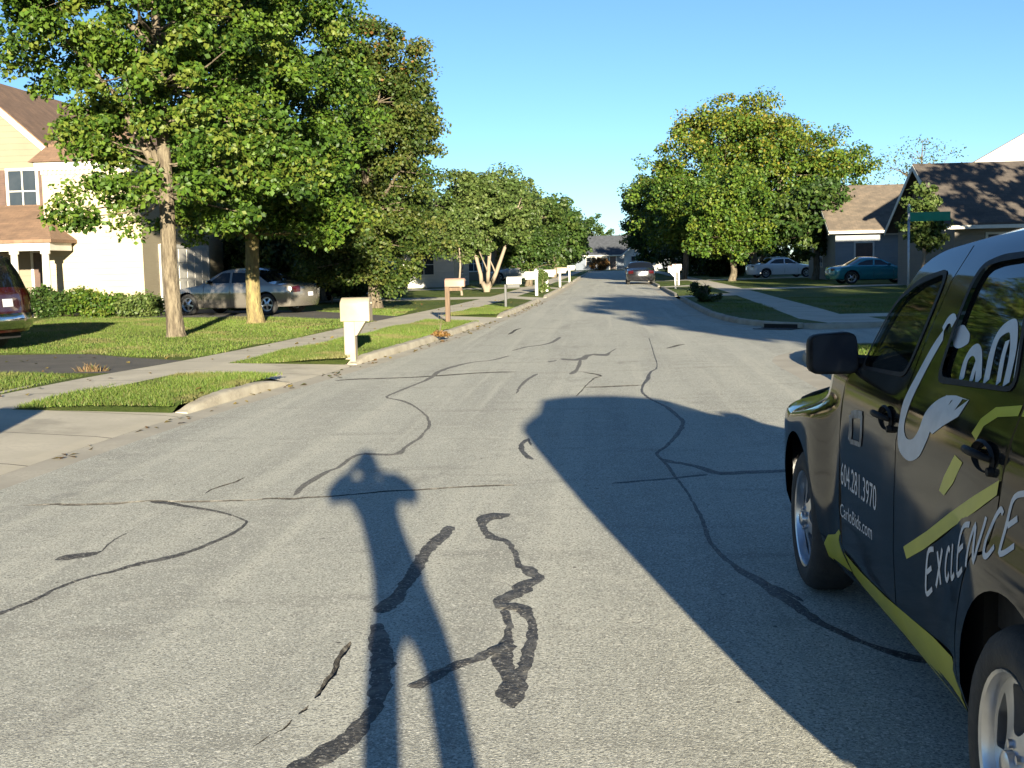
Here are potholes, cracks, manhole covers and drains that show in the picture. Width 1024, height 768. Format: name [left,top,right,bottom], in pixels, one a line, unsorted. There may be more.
drain grate [753,322,804,330]
